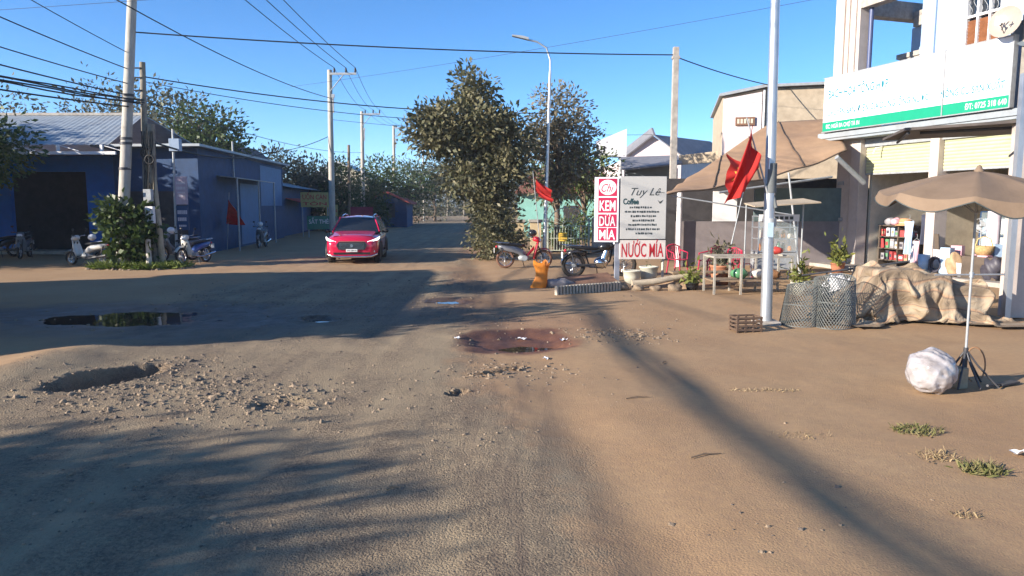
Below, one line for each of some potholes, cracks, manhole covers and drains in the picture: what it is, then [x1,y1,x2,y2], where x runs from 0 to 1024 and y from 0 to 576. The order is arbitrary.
pothole [0,303,299,331]
pothole [32,361,175,394]
pothole [296,315,346,323]
pothole [458,327,582,354]
pothole [422,296,479,305]
